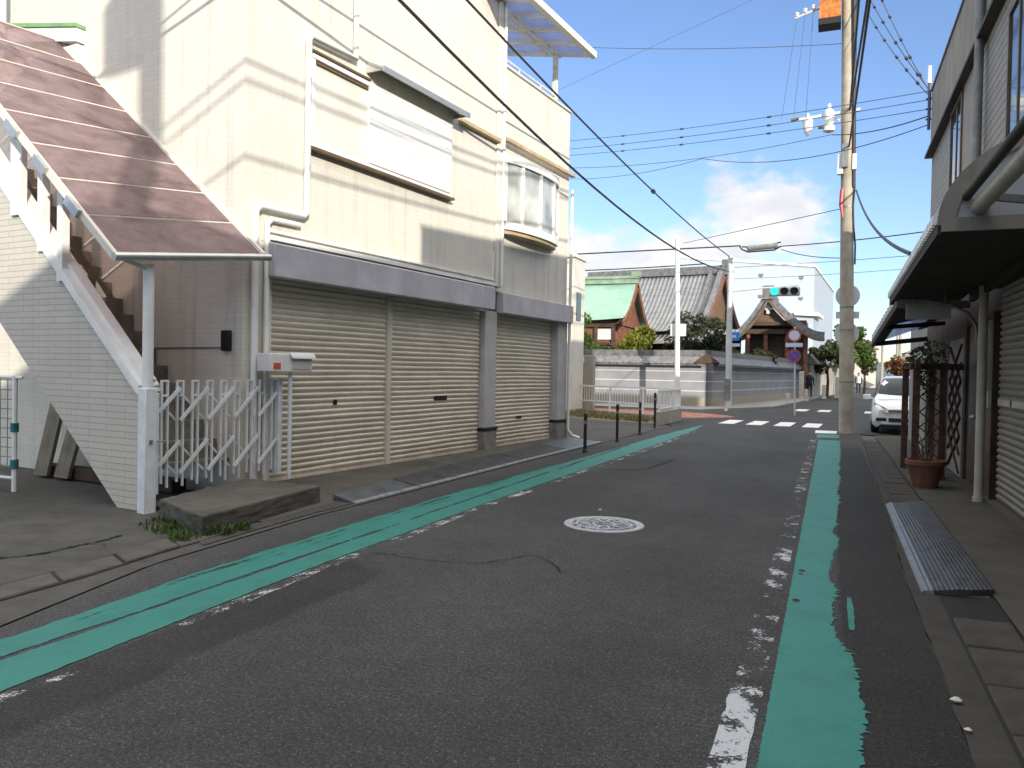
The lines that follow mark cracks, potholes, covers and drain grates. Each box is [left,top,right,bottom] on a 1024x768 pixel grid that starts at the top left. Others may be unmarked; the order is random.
crack [0,534,122,558]
crack [371,552,561,572]
manhole cover [564,516,644,533]
